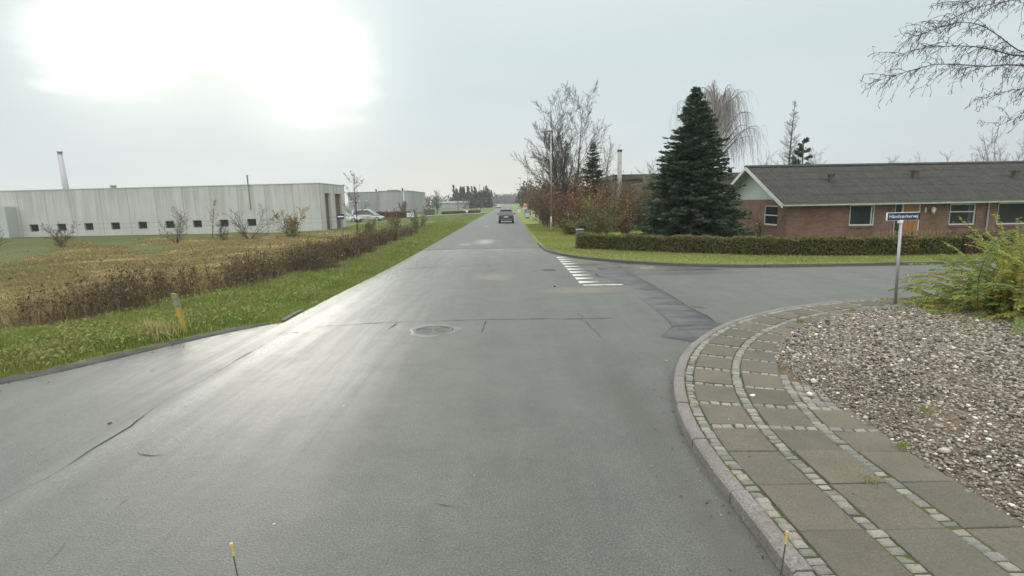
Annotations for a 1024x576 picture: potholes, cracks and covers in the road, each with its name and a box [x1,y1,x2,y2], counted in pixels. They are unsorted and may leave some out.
crack [0,343,266,501]
manhole cover [409,324,462,338]
